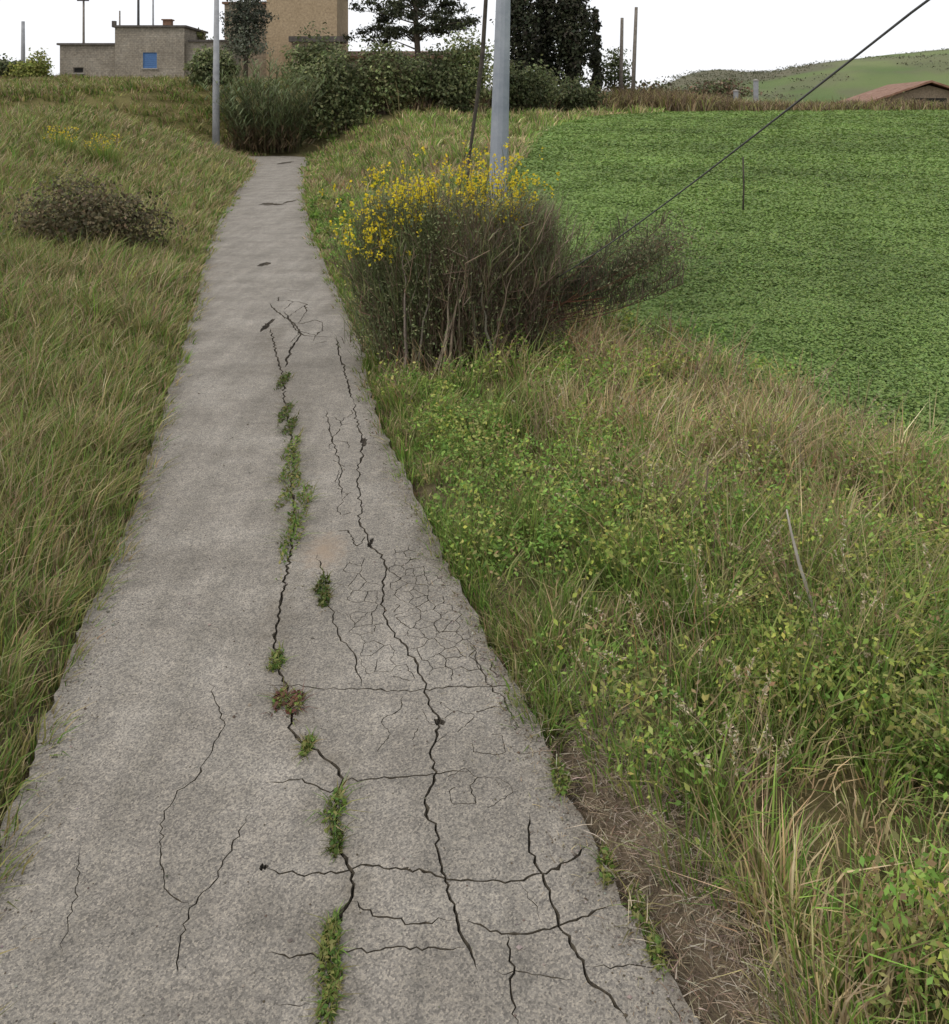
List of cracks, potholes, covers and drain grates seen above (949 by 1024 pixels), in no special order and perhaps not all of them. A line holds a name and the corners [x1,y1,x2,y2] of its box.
crack [266,289,664,1024]
crack [59,853,81,955]
crack [159,683,247,977]
